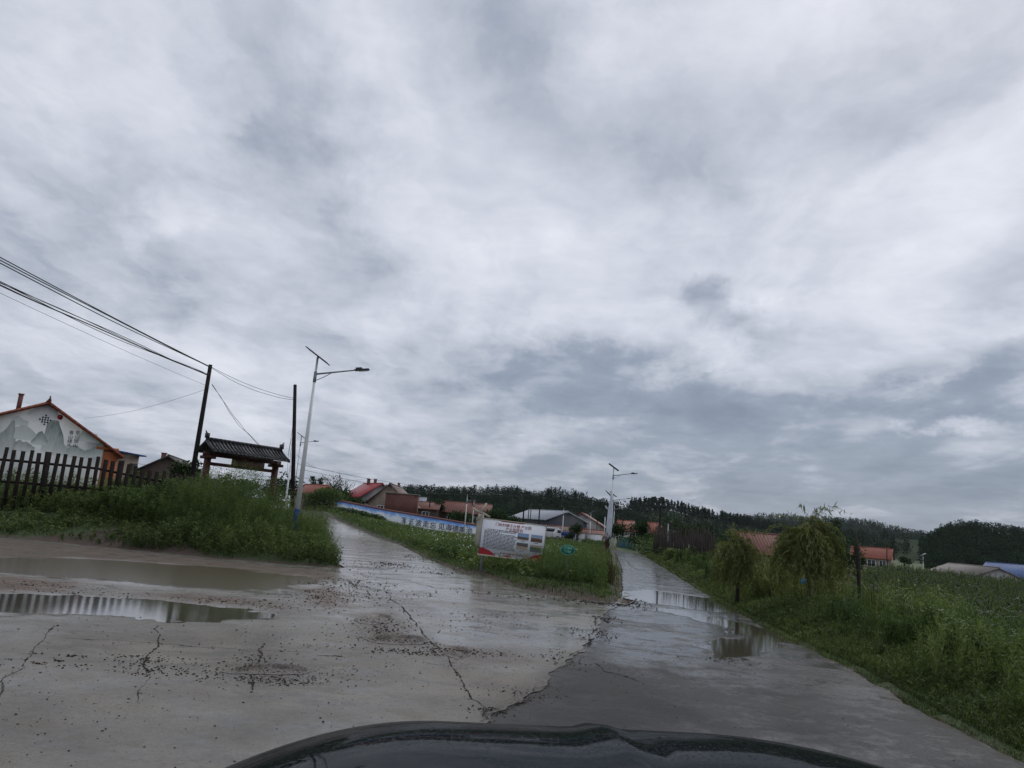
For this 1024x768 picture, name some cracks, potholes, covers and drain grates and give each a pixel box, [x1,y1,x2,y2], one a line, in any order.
crack [249,644,266,690]
pothole [221,663,312,675]
crack [569,615,640,682]
crack [0,625,55,694]
crack [137,626,161,702]
pothole [354,613,394,625]
crack [343,579,551,721]
pothole [363,634,430,645]
